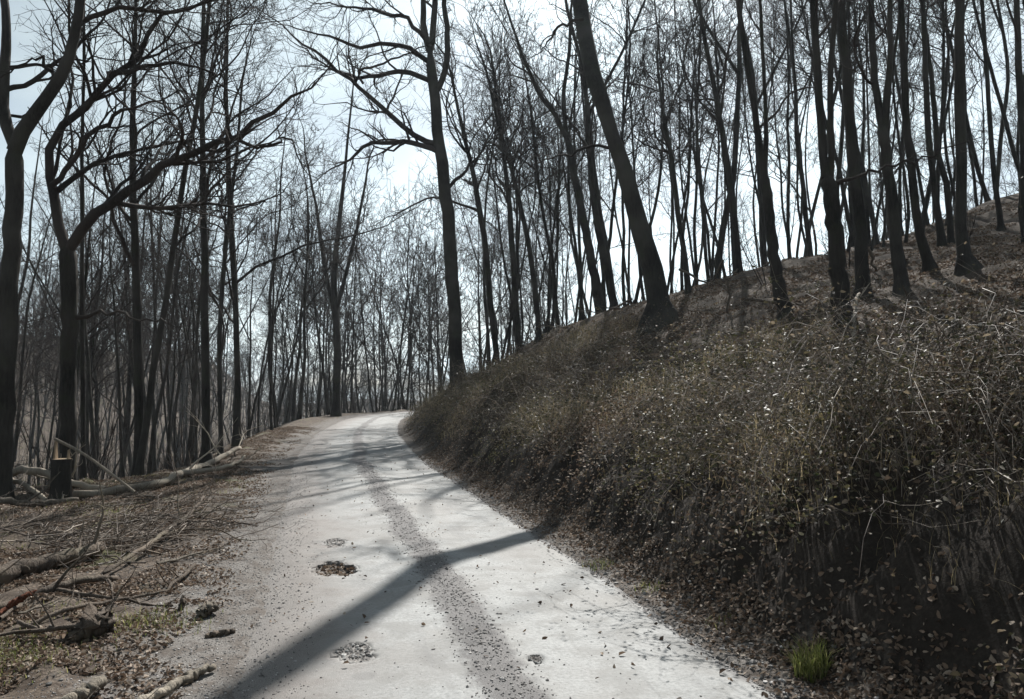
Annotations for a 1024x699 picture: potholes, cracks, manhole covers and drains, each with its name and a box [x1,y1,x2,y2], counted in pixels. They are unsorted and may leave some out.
pothole [324,538,346,549]
pothole [310,561,360,577]
pothole [330,642,375,664]
